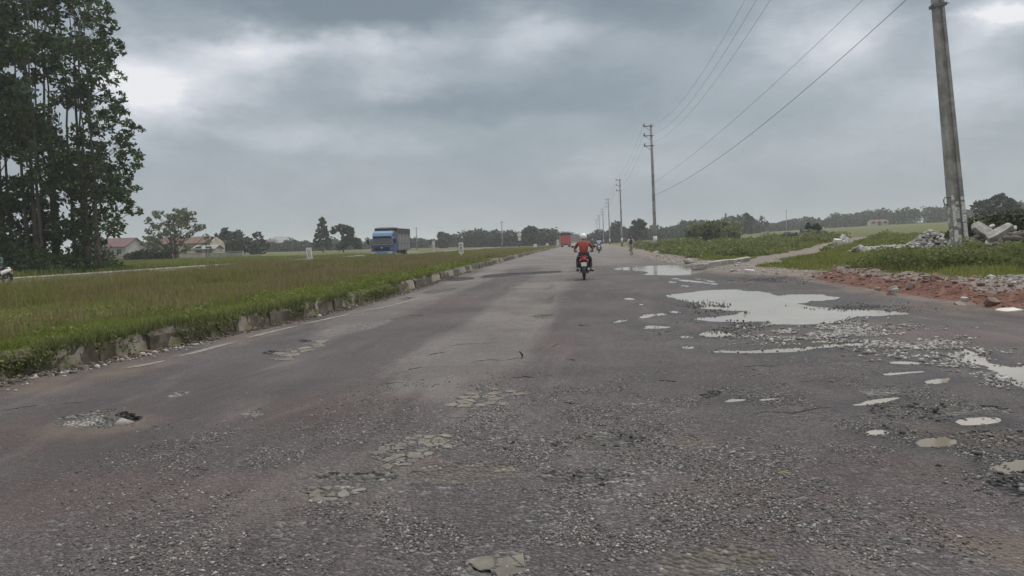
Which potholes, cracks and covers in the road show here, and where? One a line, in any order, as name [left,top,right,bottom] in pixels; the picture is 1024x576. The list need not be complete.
pothole [115,411,143,422]
pothole [665,289,910,325]
pothole [989,459,1024,475]
pothole [611,265,707,275]
pothole [707,342,863,353]
crack [385,342,533,407]
pothole [459,552,531,576]
pothole [958,349,1024,387]
pothole [956,417,1001,425]
pothole [915,437,957,447]
pothole [53,409,117,428]
